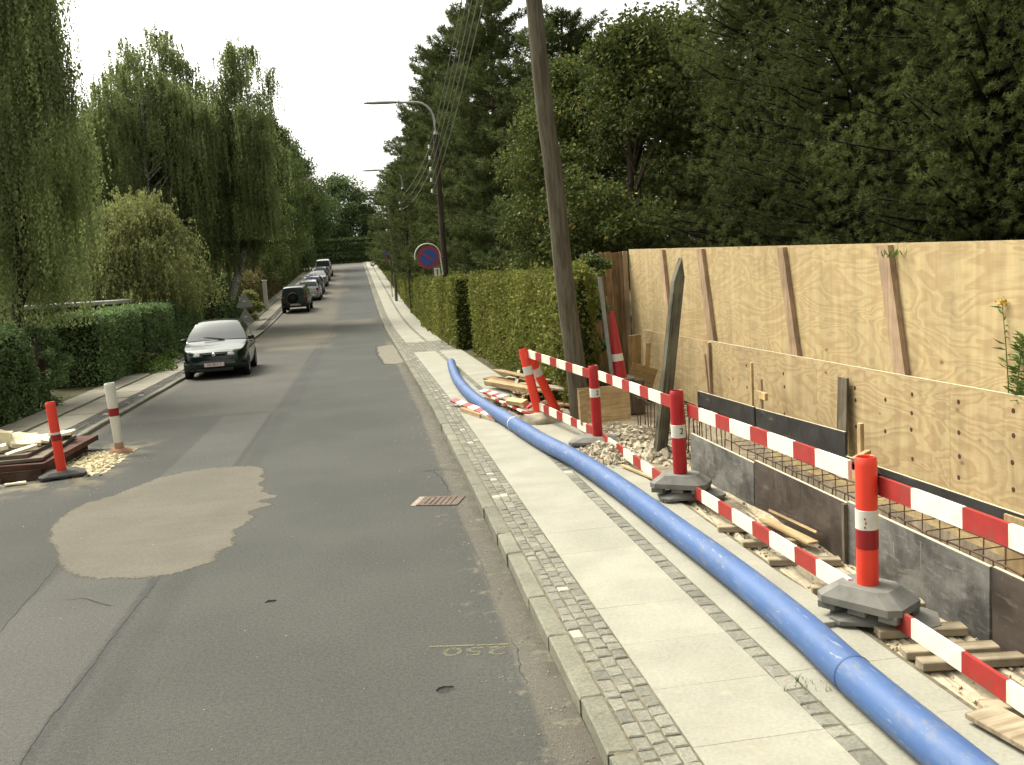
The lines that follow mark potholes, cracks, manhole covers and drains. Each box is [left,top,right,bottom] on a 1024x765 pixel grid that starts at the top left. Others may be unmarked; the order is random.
pothole [436,686,455,694]
drain grate [410,496,465,506]
